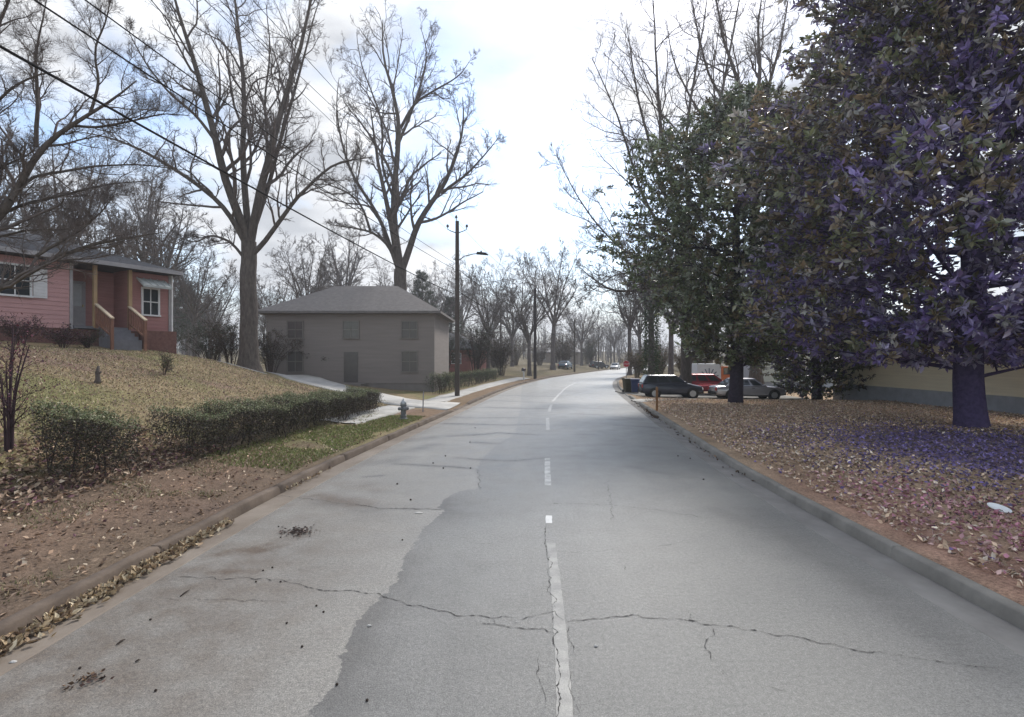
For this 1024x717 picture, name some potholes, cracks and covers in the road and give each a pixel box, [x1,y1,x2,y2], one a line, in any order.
crack [172,576,991,670]
